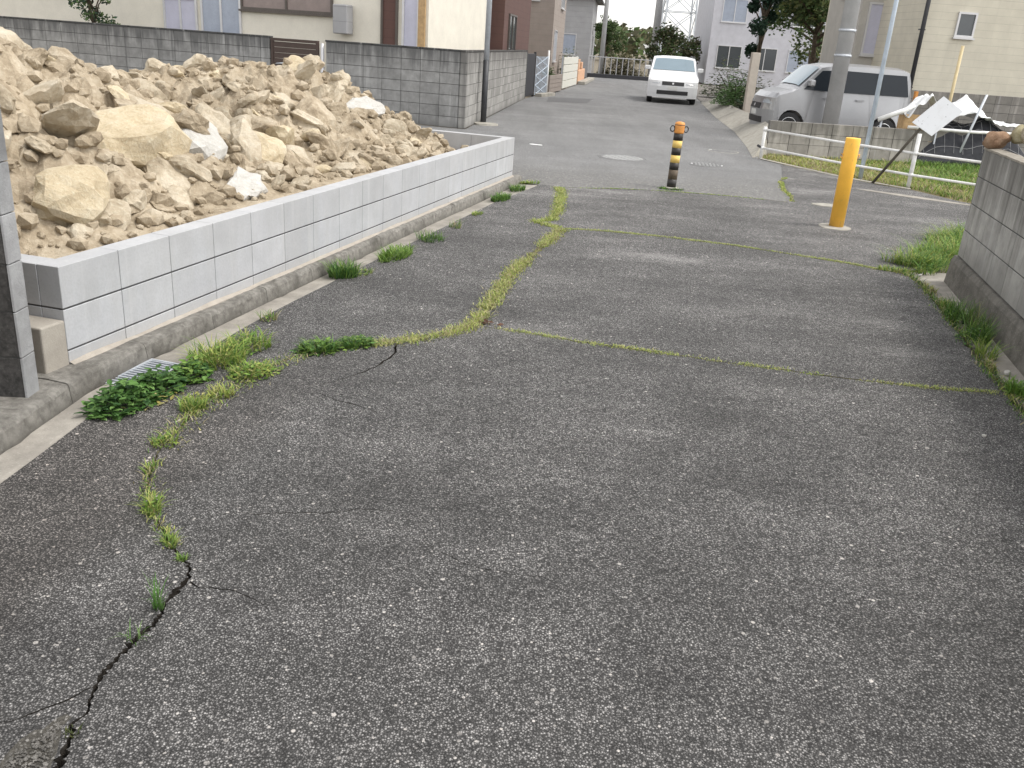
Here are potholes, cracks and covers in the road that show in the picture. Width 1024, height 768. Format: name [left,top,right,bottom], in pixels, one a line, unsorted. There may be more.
drain grate [105,358,179,385]
crack [0,232,556,768]
